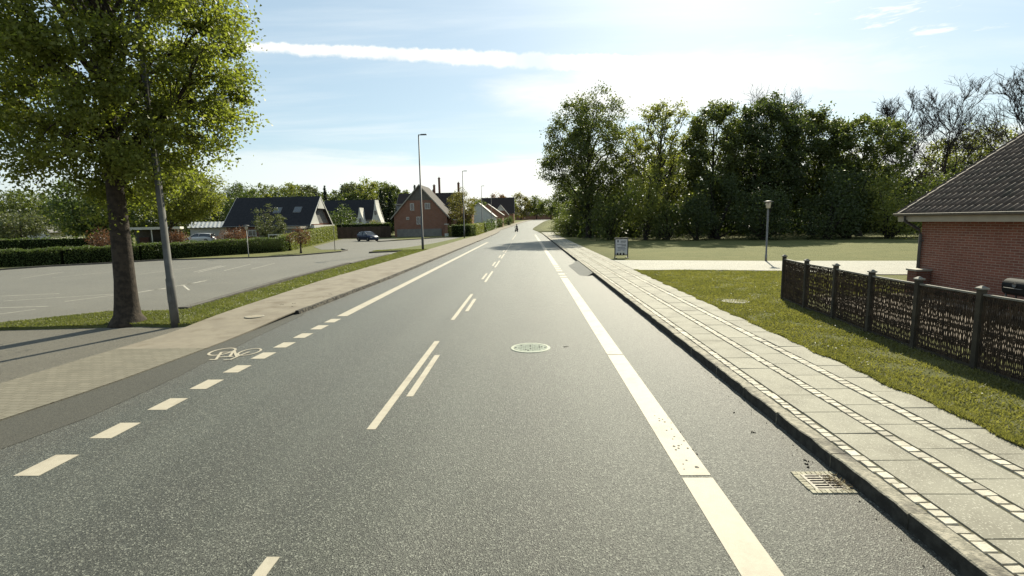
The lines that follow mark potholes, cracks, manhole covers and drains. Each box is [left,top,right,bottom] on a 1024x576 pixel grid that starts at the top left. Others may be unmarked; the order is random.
drain grate [790,471,859,494]
manhole cover [511,343,550,353]
